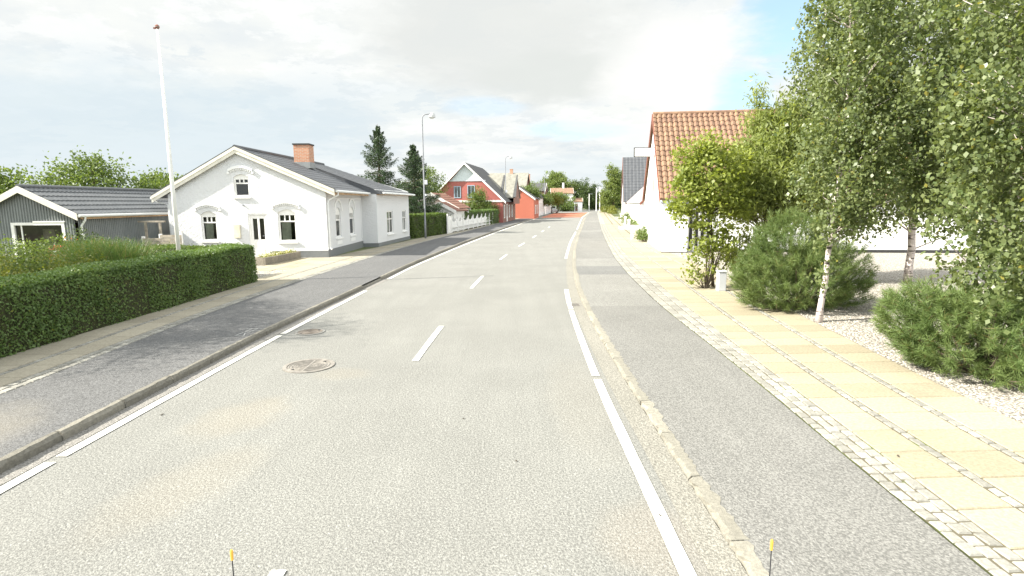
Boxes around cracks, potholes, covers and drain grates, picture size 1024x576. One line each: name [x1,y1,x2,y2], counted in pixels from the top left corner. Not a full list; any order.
manhole cover [282,358,335,373]
manhole cover [295,328,325,336]
